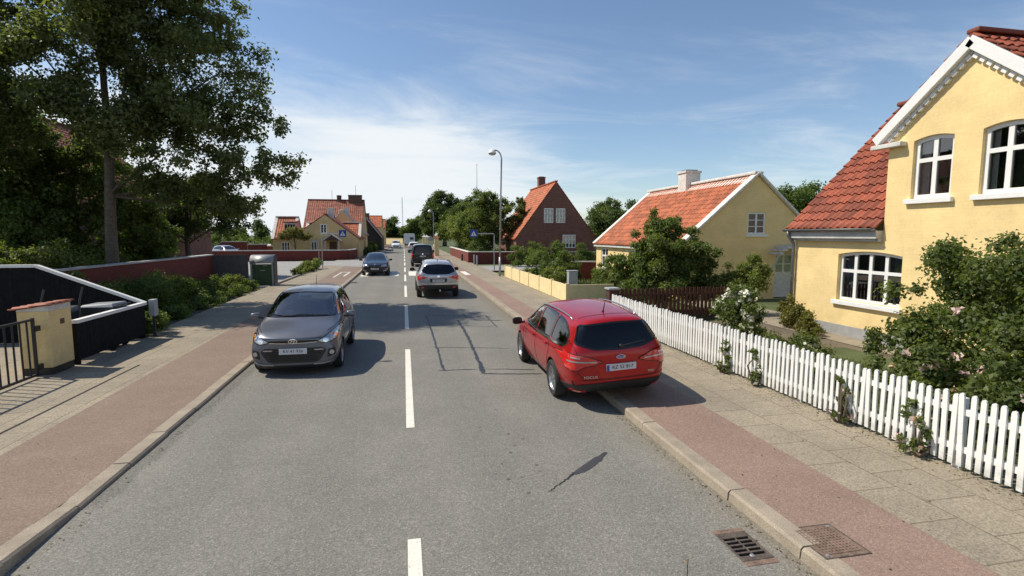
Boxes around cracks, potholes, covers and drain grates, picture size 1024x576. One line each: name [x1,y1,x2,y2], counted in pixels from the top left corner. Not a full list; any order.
drain grate [711,528,780,567]
manhole cover [795,523,872,560]
